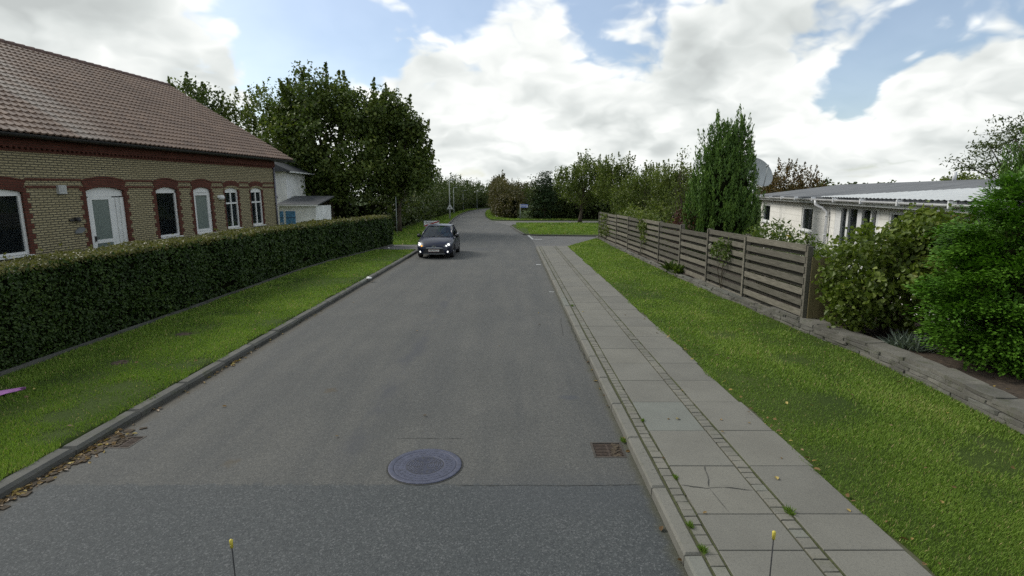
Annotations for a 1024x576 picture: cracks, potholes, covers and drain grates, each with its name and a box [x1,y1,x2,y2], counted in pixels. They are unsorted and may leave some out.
manhole cover [386,449,463,485]
drain grate [104,436,146,448]
drain grate [590,442,627,458]
crack [687,467,748,507]
